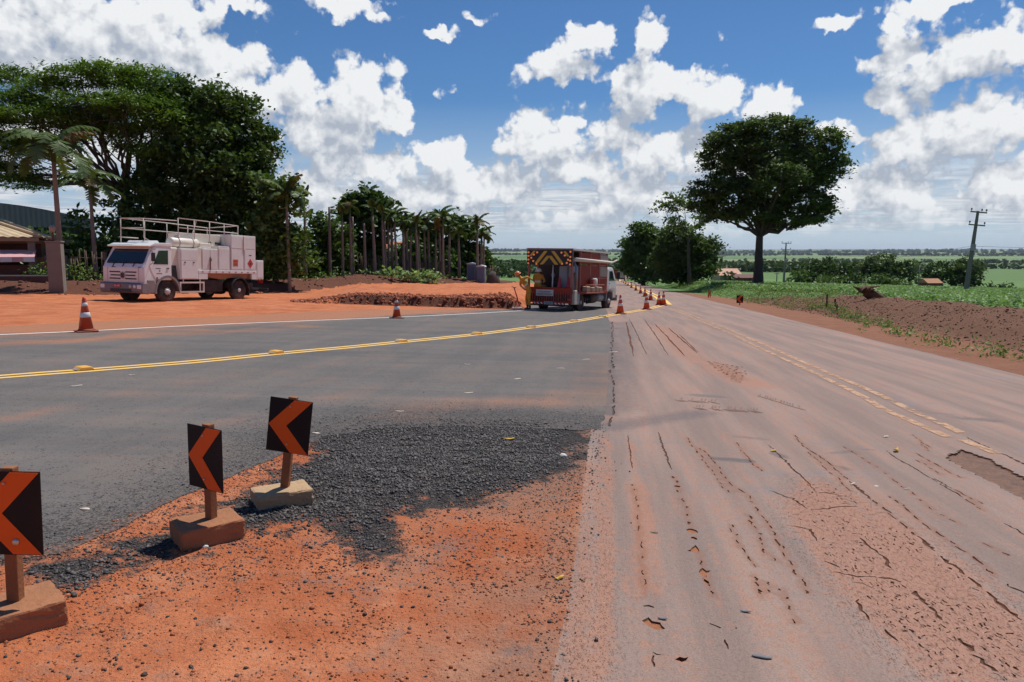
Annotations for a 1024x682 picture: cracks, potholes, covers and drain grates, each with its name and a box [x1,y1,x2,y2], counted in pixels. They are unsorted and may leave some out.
crack [626,319,747,383]
pothole [946,449,1024,500]
crack [658,432,1024,681]
